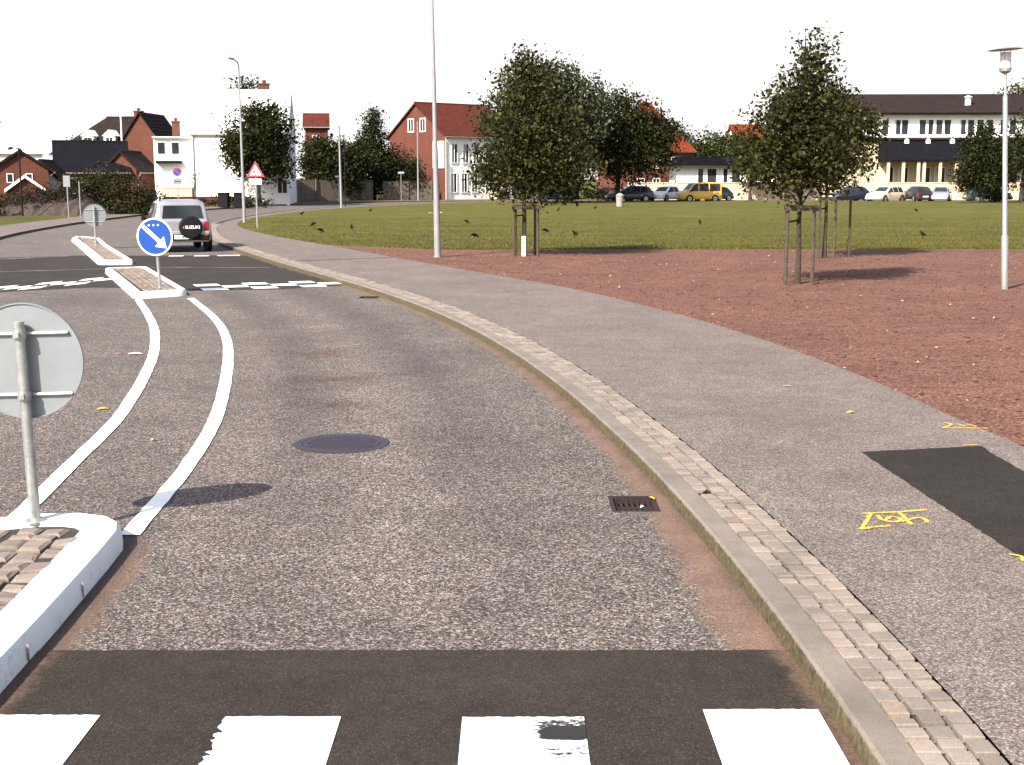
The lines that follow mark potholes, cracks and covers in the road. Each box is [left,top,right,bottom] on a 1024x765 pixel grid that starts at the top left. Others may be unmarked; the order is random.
drain grate [608,496,661,512]
manhole cover [293,433,390,454]
